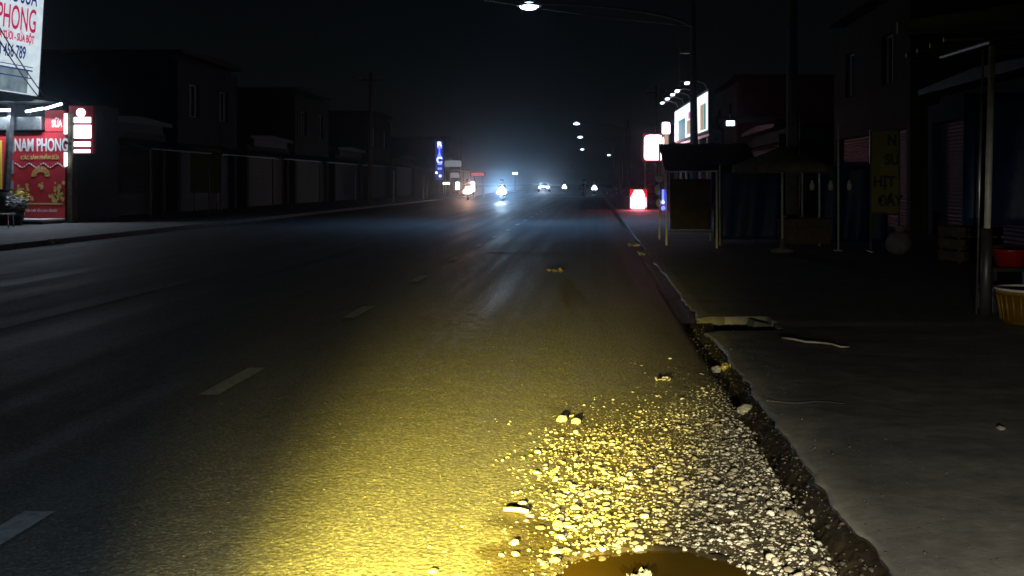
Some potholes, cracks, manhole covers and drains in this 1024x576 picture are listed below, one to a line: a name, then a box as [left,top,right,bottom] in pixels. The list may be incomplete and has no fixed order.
pothole [555,545,767,576]
